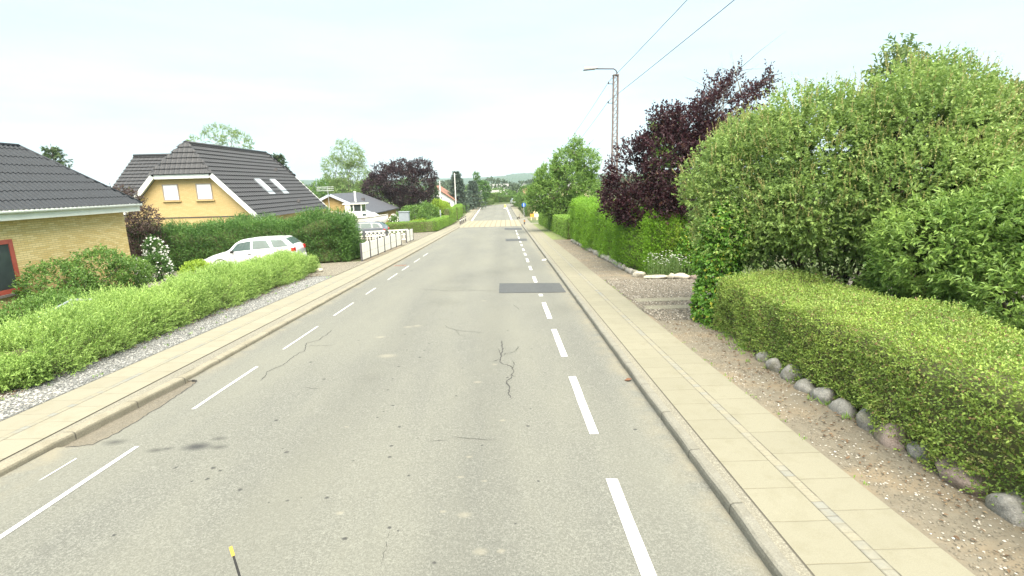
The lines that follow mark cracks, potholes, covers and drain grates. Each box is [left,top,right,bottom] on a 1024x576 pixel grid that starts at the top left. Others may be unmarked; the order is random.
crack [495,340,519,399]
